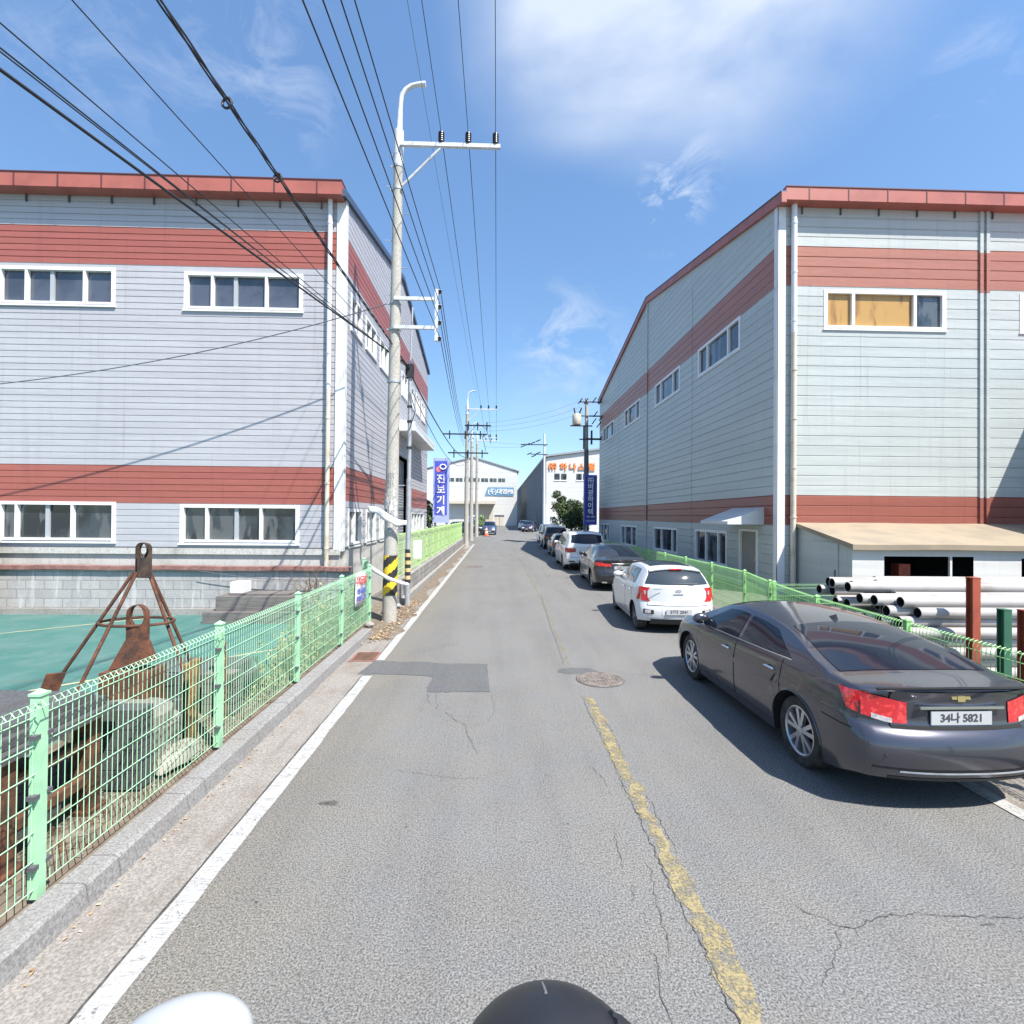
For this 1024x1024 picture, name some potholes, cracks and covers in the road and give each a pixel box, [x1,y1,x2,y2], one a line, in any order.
manhole cover [576,672,625,687]
crack [797,906,1024,986]
drain grate [348,652,382,662]
